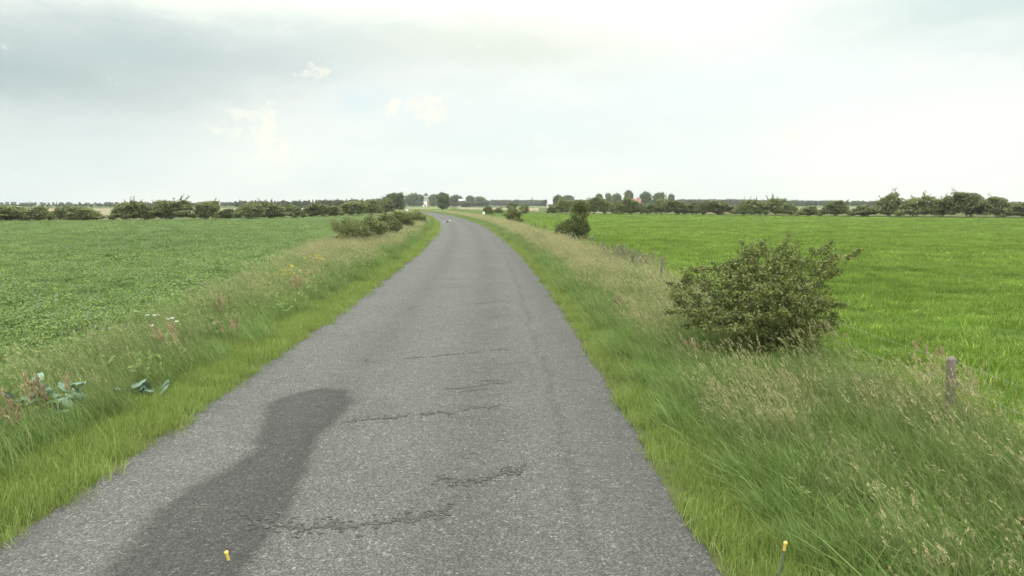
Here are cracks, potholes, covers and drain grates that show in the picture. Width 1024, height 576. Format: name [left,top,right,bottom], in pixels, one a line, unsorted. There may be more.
crack [403,286,522,359]
crack [341,379,509,423]
crack [240,439,527,538]
